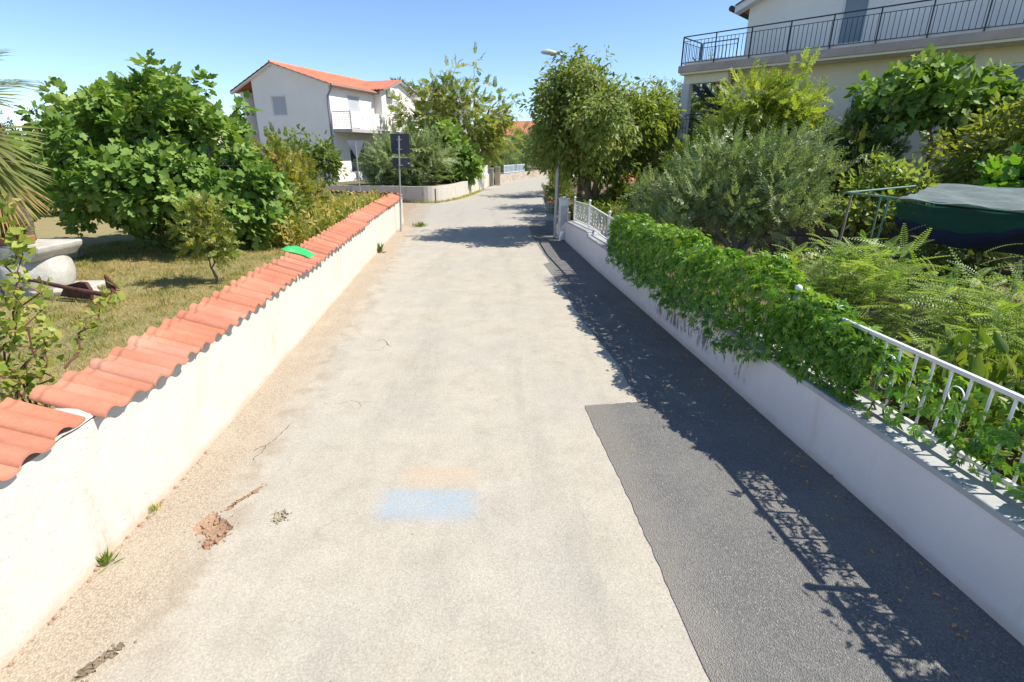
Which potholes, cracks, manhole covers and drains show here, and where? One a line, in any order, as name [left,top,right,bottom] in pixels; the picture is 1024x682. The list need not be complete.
pothole [184,510,239,550]
pothole [268,508,293,526]
pothole [70,640,137,682]
